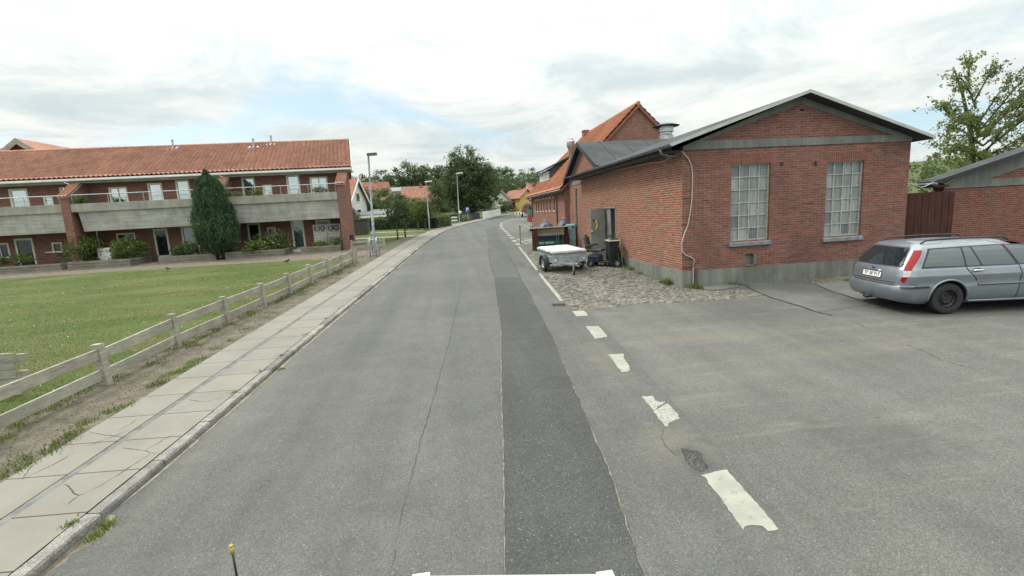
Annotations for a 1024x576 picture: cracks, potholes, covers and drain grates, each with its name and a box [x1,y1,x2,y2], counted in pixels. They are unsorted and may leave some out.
crack [390,281,462,576]
pothole [682,448,709,473]
